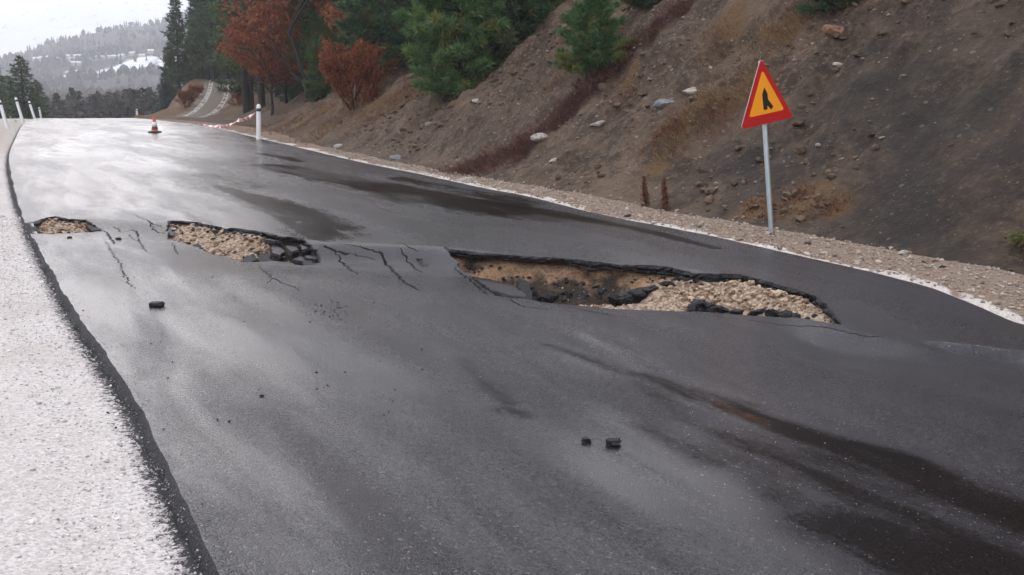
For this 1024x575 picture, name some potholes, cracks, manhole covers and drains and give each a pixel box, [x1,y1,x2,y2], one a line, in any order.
crack [324,243,423,291]
crack [101,214,178,289]
pothole [416,246,882,337]
crack [718,316,880,337]
pothole [155,221,321,266]
pothole [31,216,102,234]
